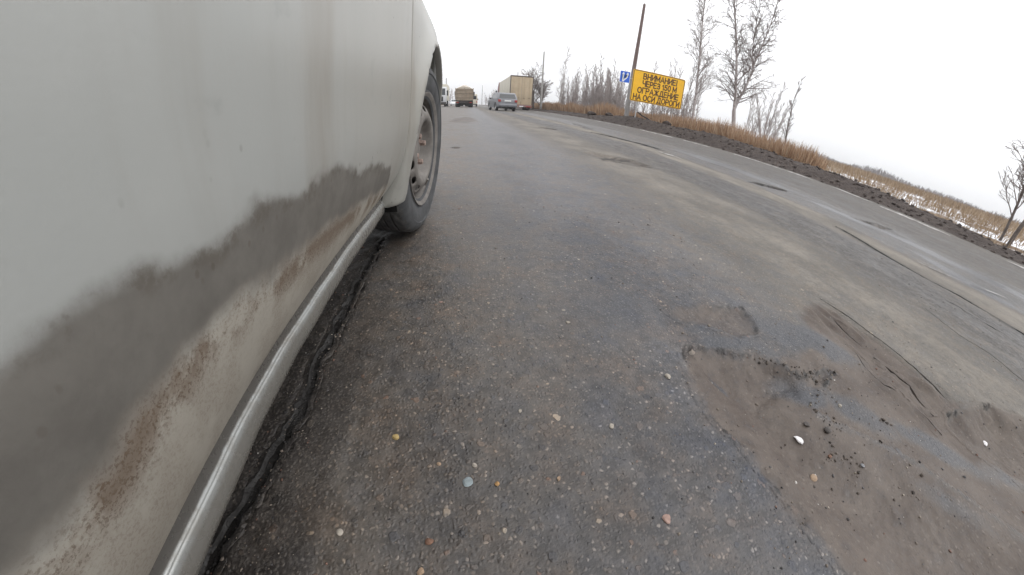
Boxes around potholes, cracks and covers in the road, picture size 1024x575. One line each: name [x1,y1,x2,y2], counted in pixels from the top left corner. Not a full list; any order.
pothole [661,301,764,343]
crack [199,235,388,575]
crack [818,226,1024,437]
pothole [583,151,657,170]
pothole [676,341,1024,575]
pothole [747,181,790,193]
